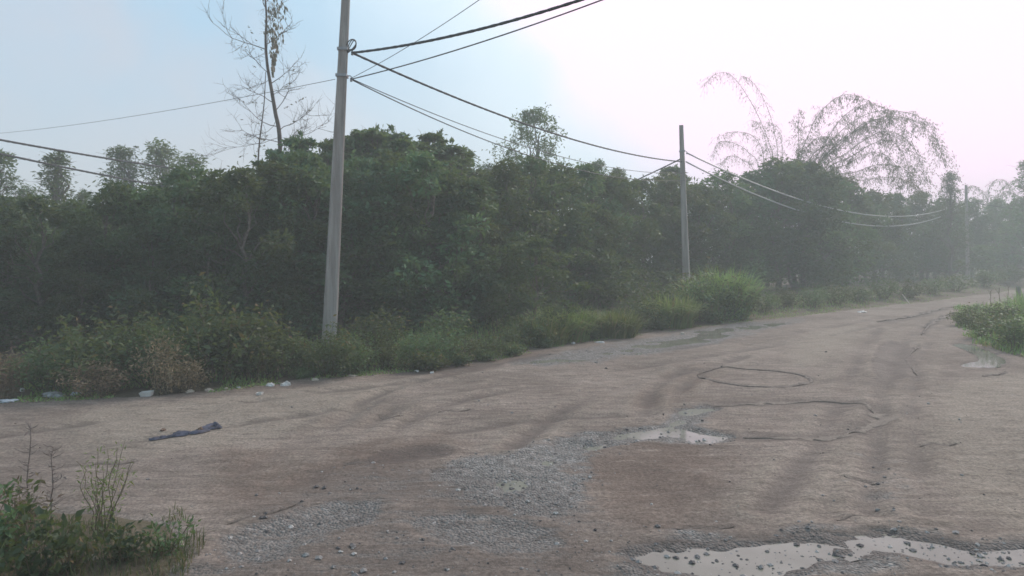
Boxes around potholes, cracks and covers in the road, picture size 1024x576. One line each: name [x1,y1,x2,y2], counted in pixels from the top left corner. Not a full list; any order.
pothole [951,343,1008,368]
pothole [583,405,732,450]
pothole [615,529,1024,576]
